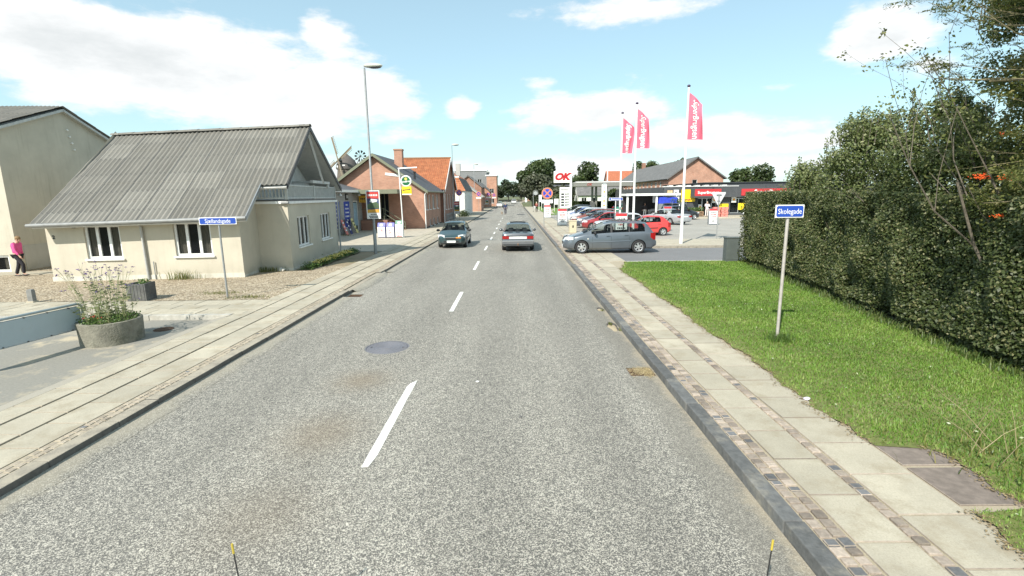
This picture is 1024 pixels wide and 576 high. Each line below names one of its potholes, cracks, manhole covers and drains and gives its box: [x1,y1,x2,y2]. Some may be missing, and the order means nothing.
manhole cover [365,341,409,354]
